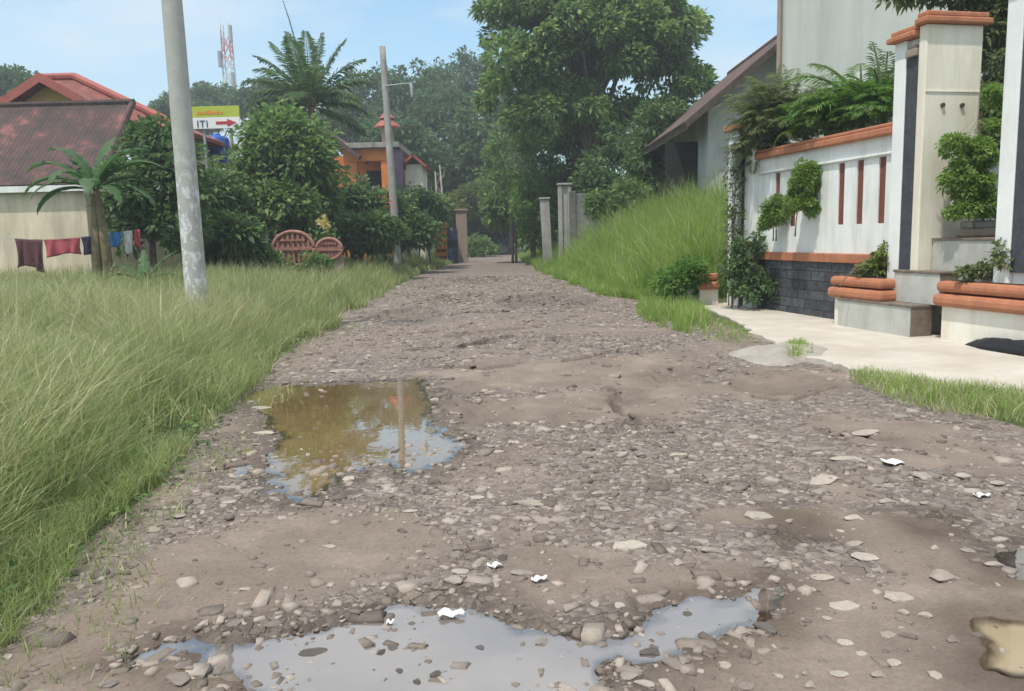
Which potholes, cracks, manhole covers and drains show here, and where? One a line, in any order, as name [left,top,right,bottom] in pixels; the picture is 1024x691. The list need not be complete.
pothole [236,377,478,507]
pothole [950,605,1024,683]
pothole [122,579,792,691]
